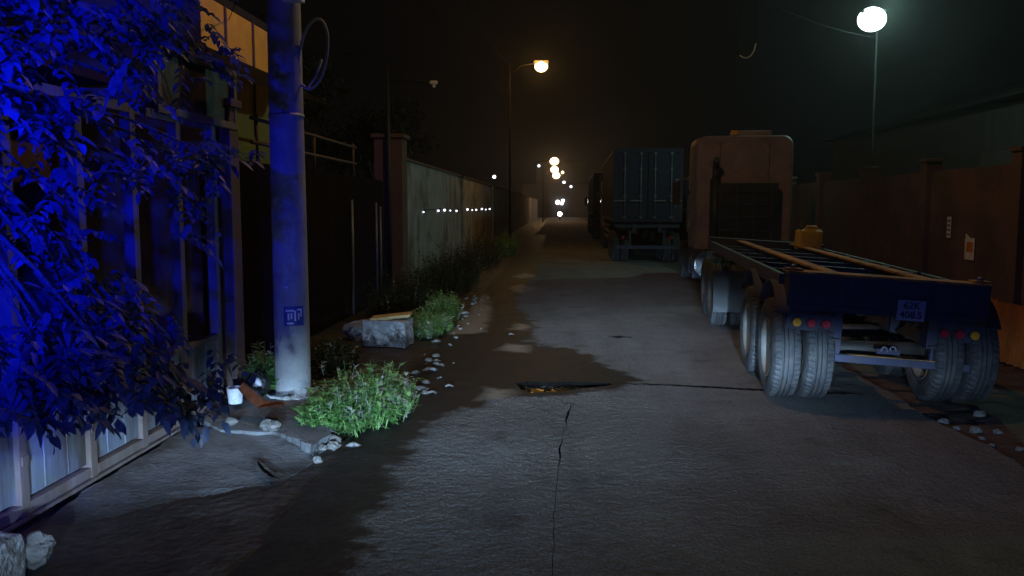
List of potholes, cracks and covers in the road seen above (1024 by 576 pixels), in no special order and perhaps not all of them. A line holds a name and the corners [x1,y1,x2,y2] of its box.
pothole [506,379,622,395]
crack [537,403,579,576]
crack [254,460,281,479]
